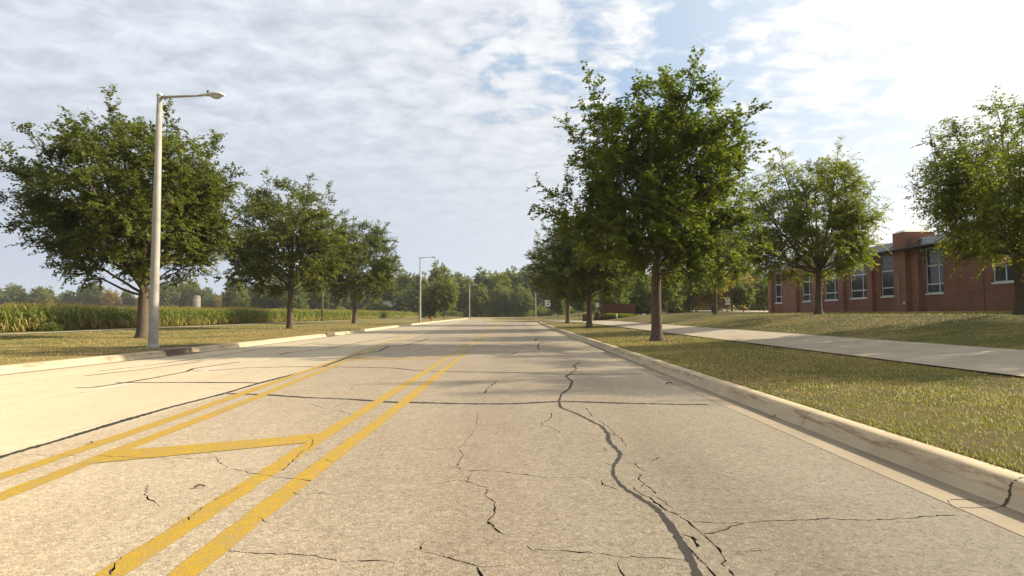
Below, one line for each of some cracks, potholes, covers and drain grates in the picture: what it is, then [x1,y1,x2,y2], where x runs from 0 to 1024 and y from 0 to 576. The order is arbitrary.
crack [439,408,1023,576]
crack [419,542,509,576]
